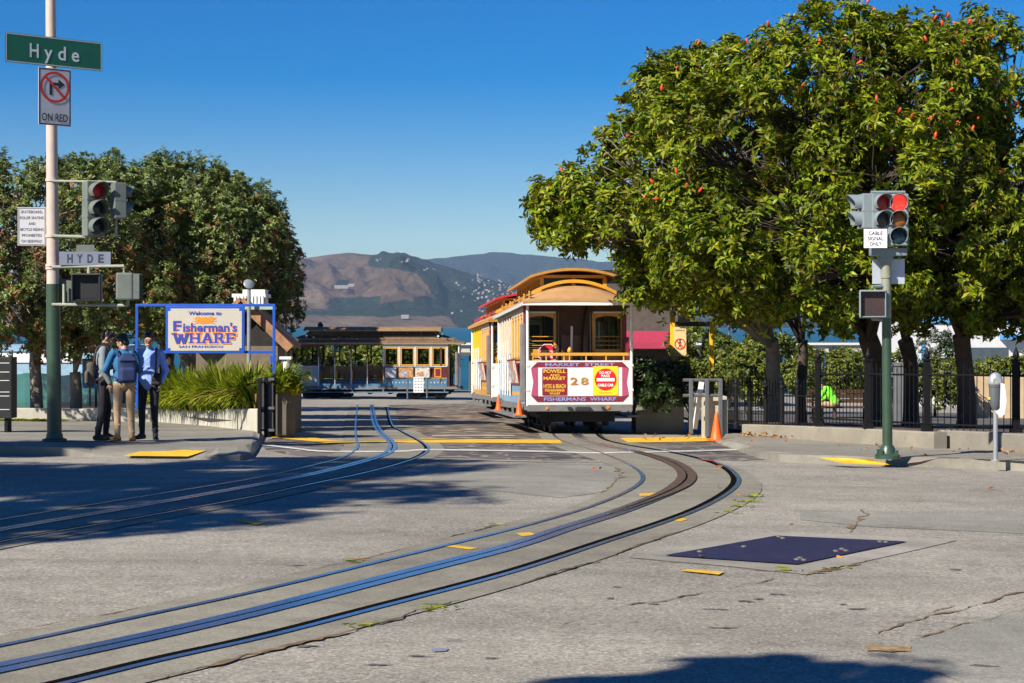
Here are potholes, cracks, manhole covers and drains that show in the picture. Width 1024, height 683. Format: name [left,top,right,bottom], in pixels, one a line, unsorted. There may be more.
crack [878,592,1023,641]
utility cover [630,532,952,574]
crack [846,509,870,532]
